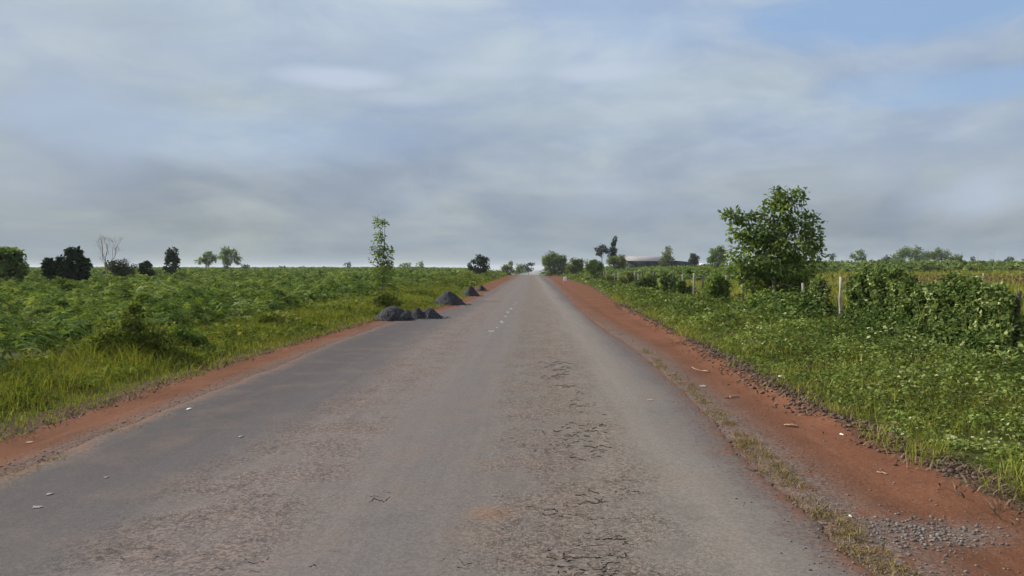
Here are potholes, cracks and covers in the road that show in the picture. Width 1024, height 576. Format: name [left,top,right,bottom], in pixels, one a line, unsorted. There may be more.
crack [522,359,614,461]
crack [526,488,641,576]
